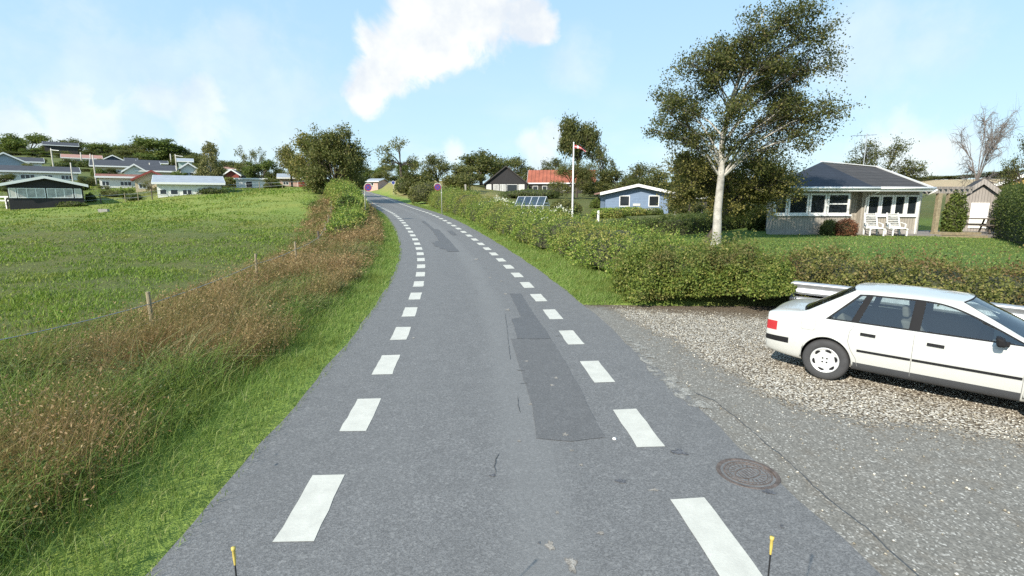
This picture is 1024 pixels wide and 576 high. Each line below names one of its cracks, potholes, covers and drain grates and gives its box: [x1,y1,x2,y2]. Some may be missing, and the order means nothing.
manhole cover [716,458,781,489]
crack [696,393,919,576]
